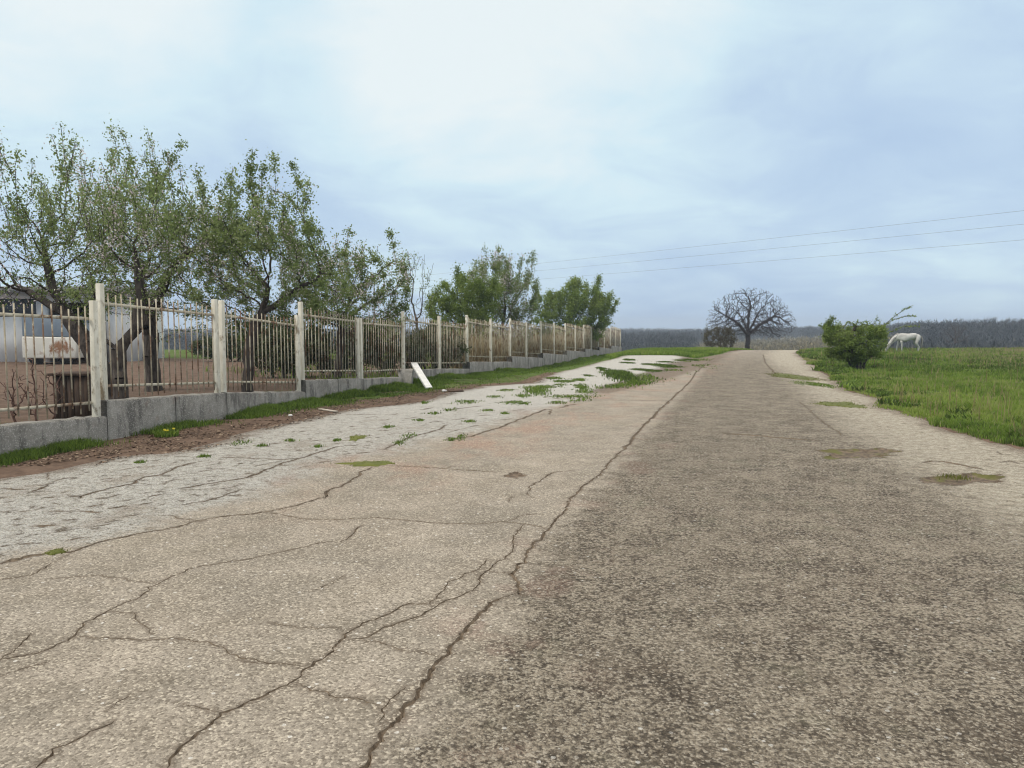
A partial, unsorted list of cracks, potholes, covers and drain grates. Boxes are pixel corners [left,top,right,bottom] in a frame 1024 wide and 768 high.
pothole [815,448,902,460]
crack [0,357,716,768]
pothole [919,473,1005,486]
